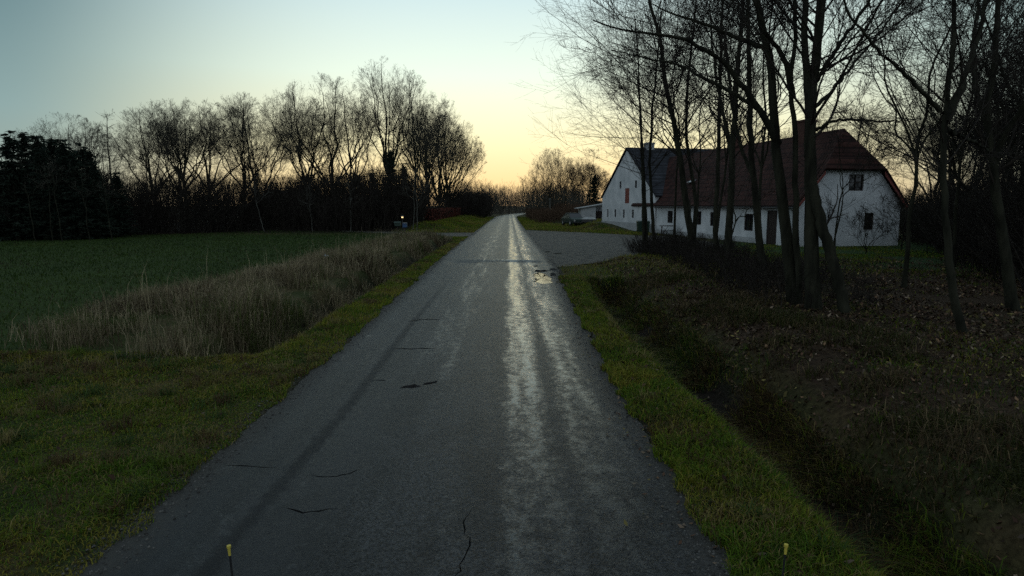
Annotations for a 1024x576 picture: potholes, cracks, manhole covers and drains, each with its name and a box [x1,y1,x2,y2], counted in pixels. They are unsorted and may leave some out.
crack [455,505,476,576]
pothole [533,272,553,284]
